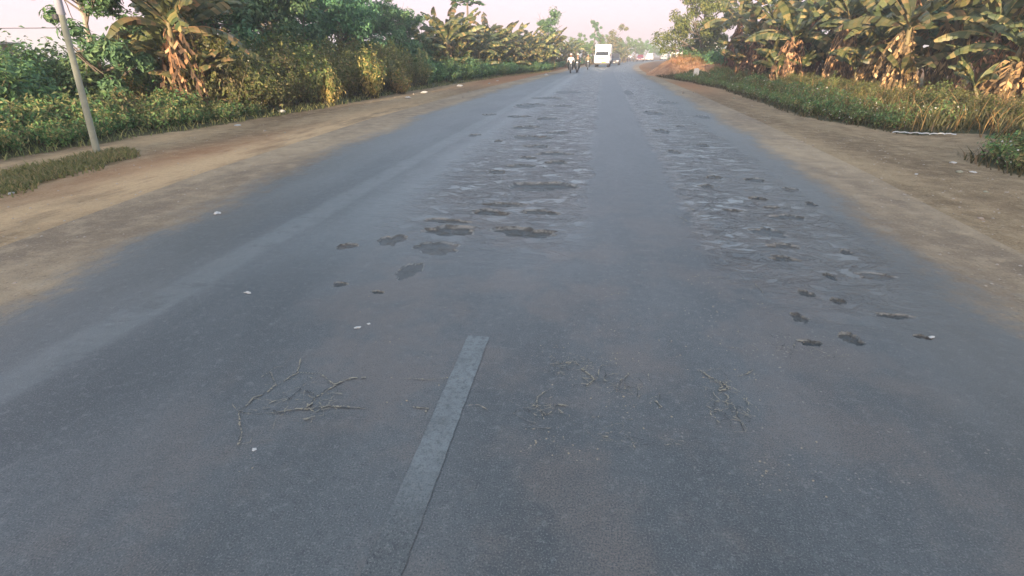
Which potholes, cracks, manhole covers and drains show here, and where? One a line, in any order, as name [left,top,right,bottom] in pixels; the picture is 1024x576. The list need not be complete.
pothole [837,331,866,346]
pothole [488,226,558,238]
pothole [394,262,425,281]
pothole [412,241,461,255]
pothole [874,312,918,320]
pothole [377,234,408,246]
pothole [506,181,581,192]
pothole [420,224,476,236]
pothole [336,242,359,250]
pothole [789,312,811,324]
